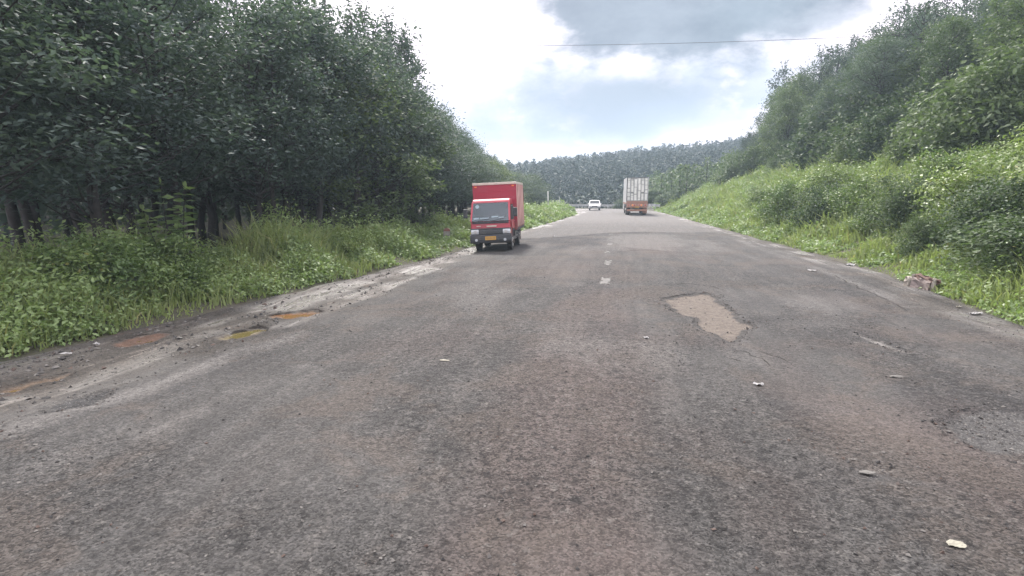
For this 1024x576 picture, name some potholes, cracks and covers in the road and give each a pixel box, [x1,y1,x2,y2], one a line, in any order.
crack [716,348,792,368]
pothole [658,291,759,345]
pothole [211,325,269,344]
pothole [0,371,77,393]
pothole [262,309,325,319]
pothole [105,332,175,348]
